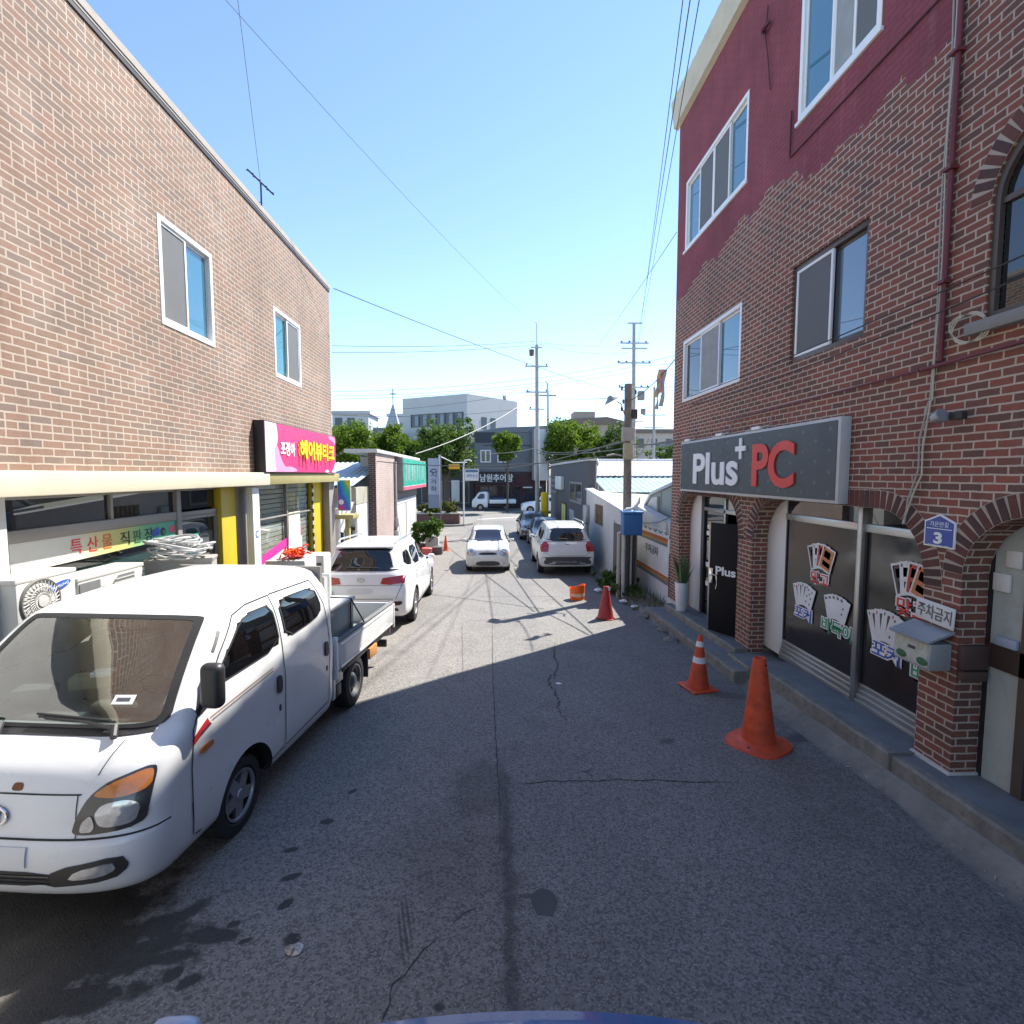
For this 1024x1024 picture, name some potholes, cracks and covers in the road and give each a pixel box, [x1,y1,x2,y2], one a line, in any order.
crack [548,644,566,719]
crack [507,768,742,784]
crack [382,907,475,1023]
